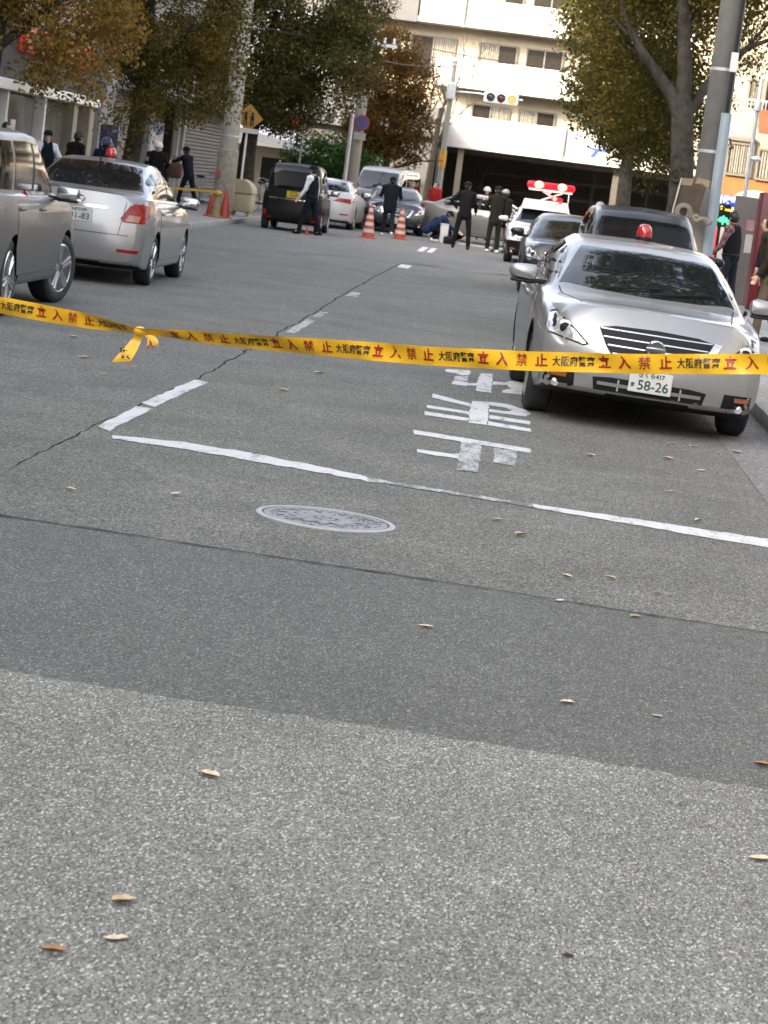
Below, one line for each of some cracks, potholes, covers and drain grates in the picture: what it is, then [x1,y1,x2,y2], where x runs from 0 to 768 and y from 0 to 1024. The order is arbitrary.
crack [1,264,399,475]
manhole cover [255,505,396,534]
